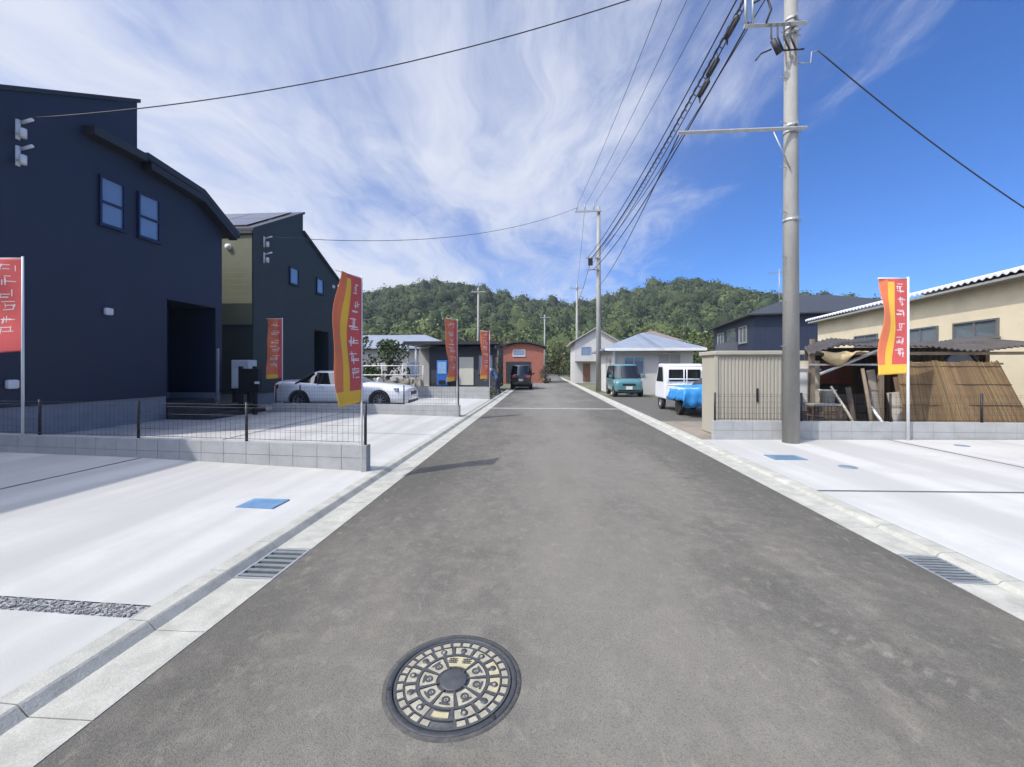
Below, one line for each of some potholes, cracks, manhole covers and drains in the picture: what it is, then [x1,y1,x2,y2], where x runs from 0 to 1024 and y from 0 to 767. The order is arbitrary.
drain grate [899,555,997,585]
drain grate [233,548,311,579]
manhole cover [381,635,522,743]
